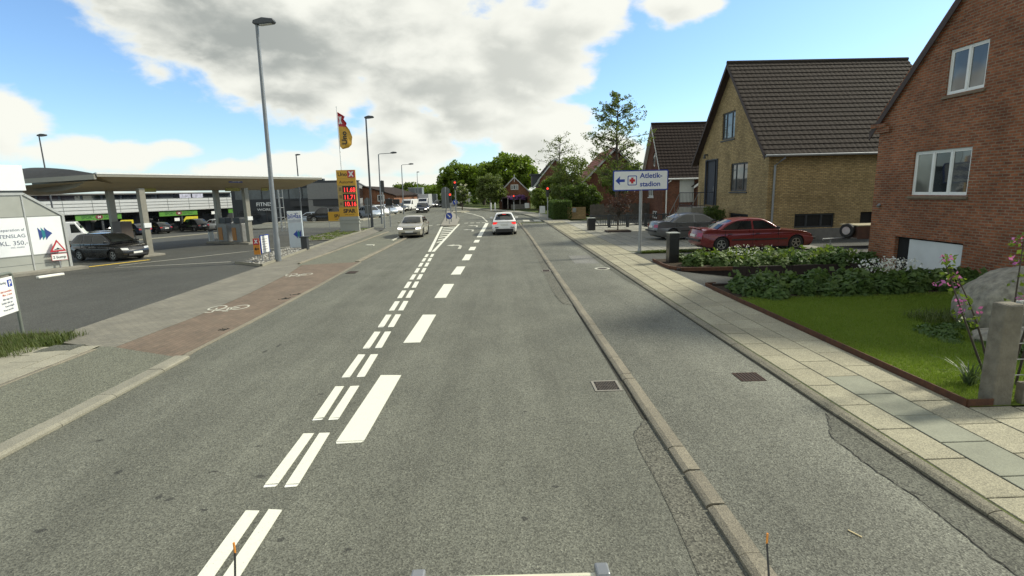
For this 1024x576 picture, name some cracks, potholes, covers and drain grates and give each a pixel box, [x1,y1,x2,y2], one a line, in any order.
drain grate [732,372,767,381]
drain grate [591,380,623,392]
